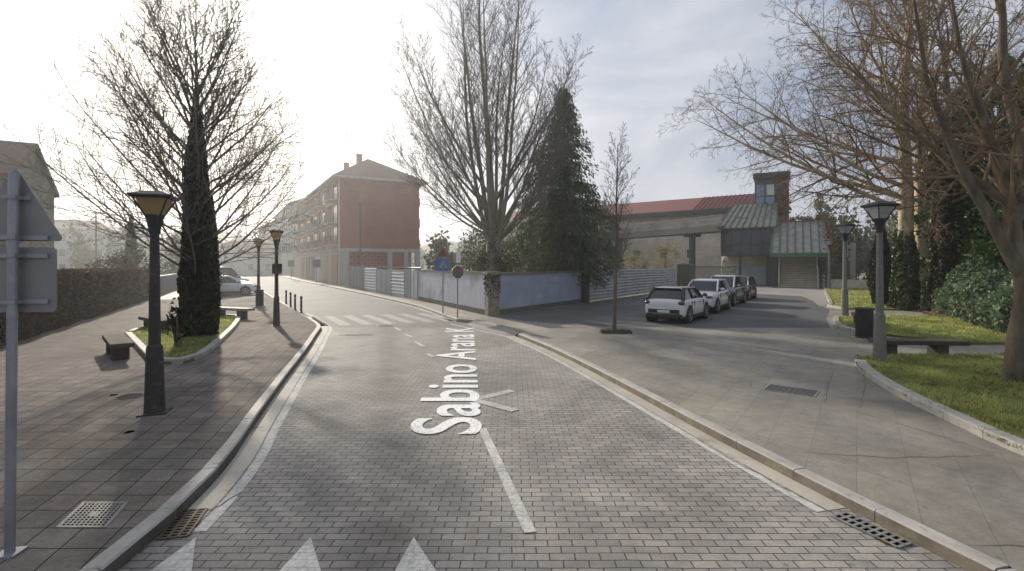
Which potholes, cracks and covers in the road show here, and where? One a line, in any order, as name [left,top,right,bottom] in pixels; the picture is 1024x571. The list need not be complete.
drain grate [831,511,913,549]
crack [793,373,992,458]
drain grate [156,507,208,540]
